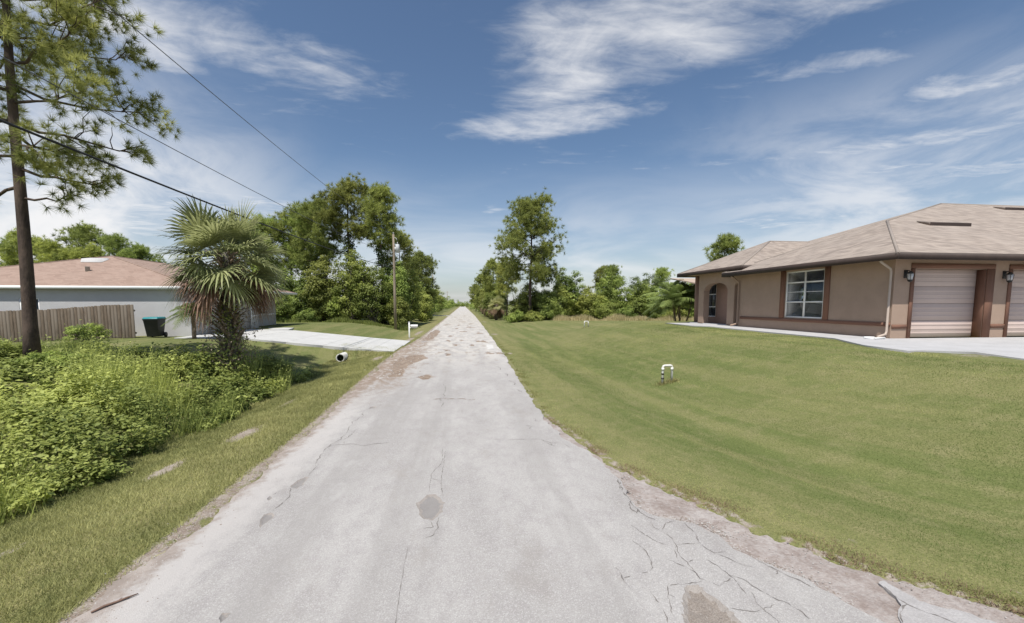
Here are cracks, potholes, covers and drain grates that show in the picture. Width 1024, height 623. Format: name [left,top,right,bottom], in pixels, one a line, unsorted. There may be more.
crack [617,479,810,622]
